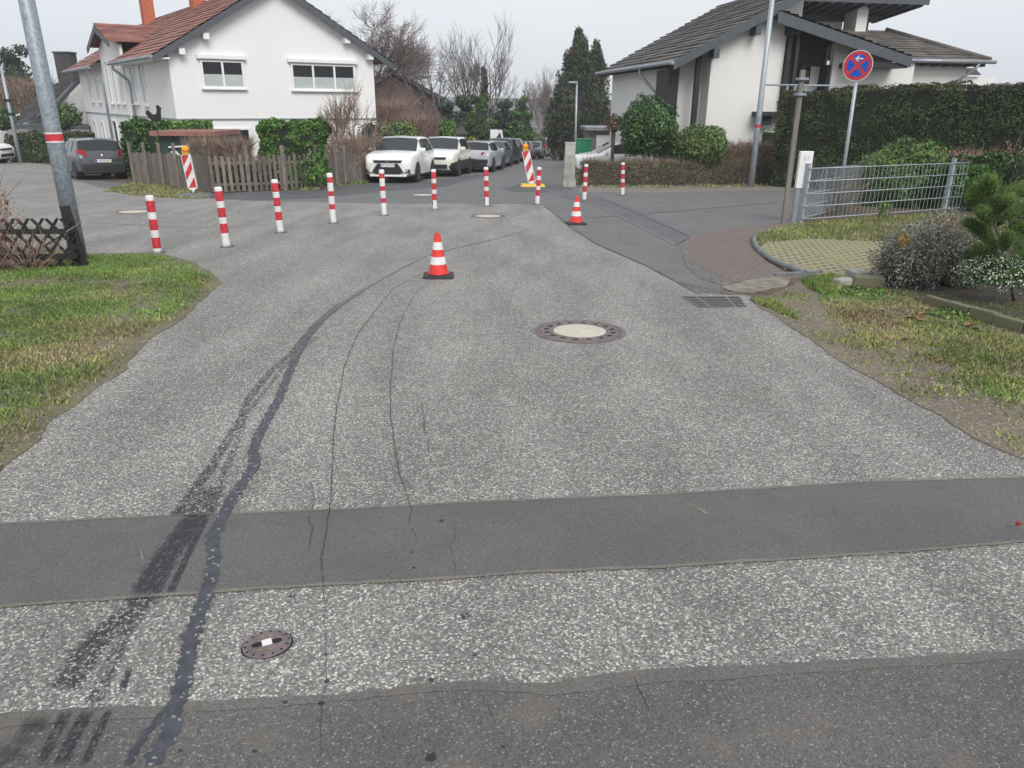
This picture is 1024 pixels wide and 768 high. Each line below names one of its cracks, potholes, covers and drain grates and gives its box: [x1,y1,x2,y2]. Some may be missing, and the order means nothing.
drain grate [681,296,747,308]
utility cover [241,630,293,659]
manhole cover [534,320,626,344]
crack [308,273,520,759]
